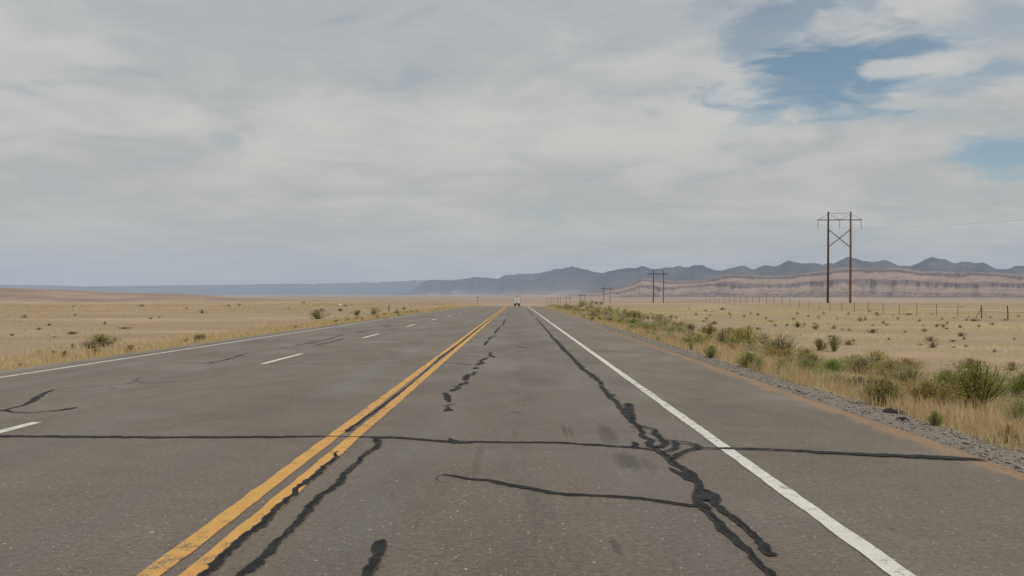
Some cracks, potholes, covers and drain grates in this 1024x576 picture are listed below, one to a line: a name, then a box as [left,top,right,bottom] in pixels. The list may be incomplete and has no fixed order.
crack [0,311,985,576]
